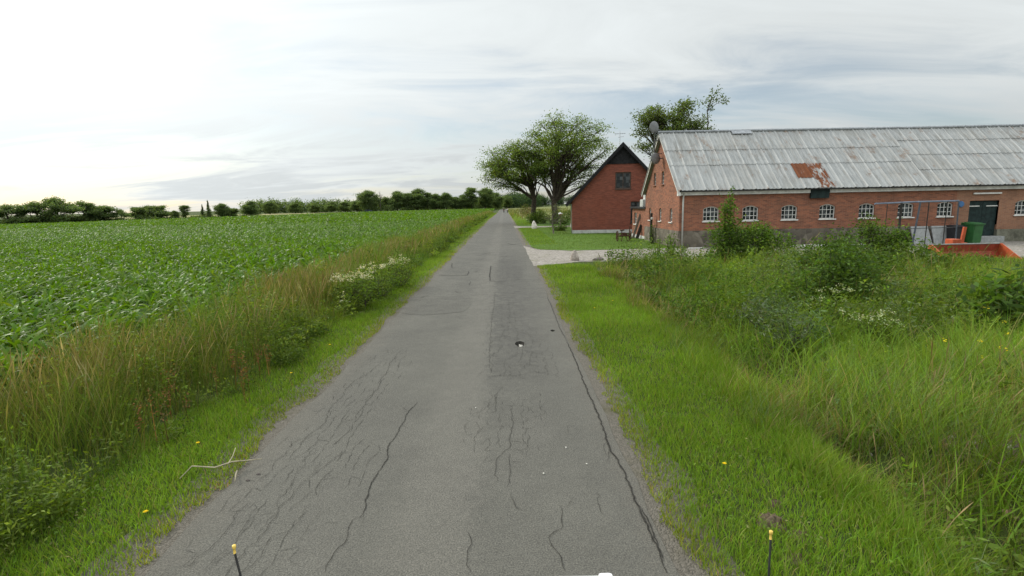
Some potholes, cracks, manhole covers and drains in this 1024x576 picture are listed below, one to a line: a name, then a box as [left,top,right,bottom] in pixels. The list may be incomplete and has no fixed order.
crack [464,394,568,510]
crack [325,403,417,571]
crack [486,293,667,572]
